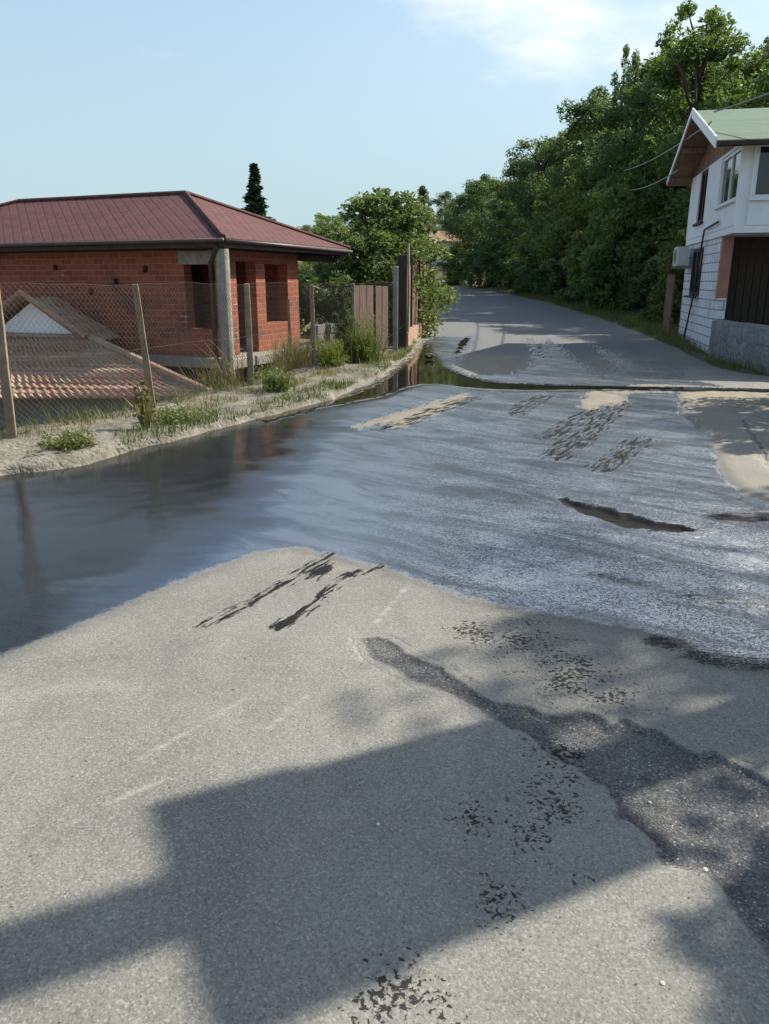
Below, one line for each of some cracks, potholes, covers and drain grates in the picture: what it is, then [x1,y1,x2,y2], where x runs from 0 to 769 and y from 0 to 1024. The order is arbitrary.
pothole [550,495,718,538]
